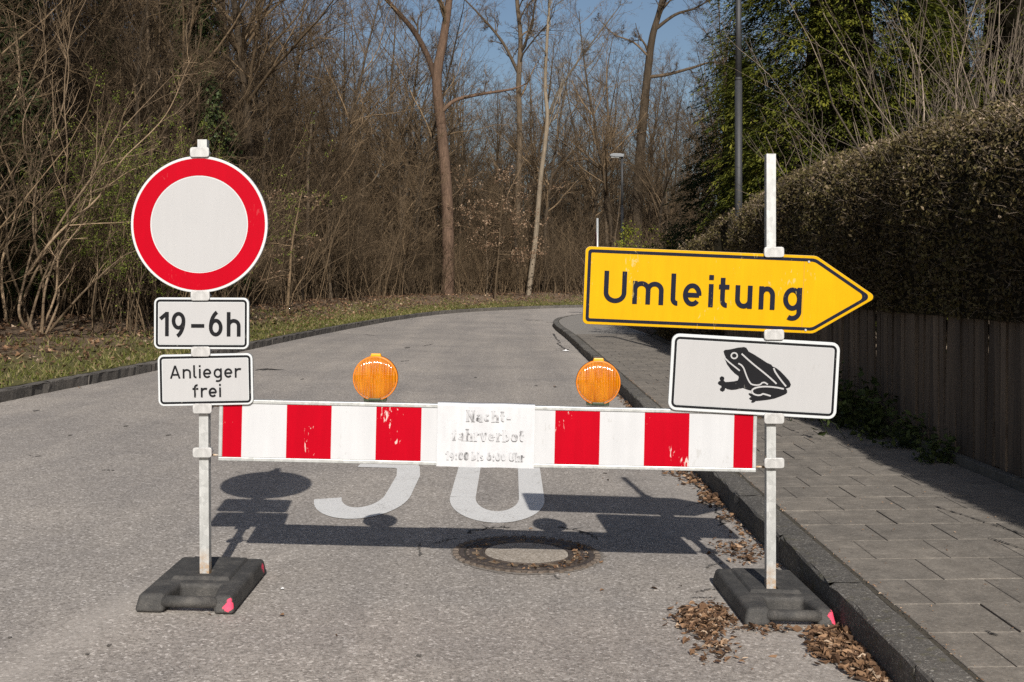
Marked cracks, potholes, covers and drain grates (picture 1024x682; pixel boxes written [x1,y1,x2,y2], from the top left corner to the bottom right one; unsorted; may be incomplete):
manhole cover [451,535,606,575]
